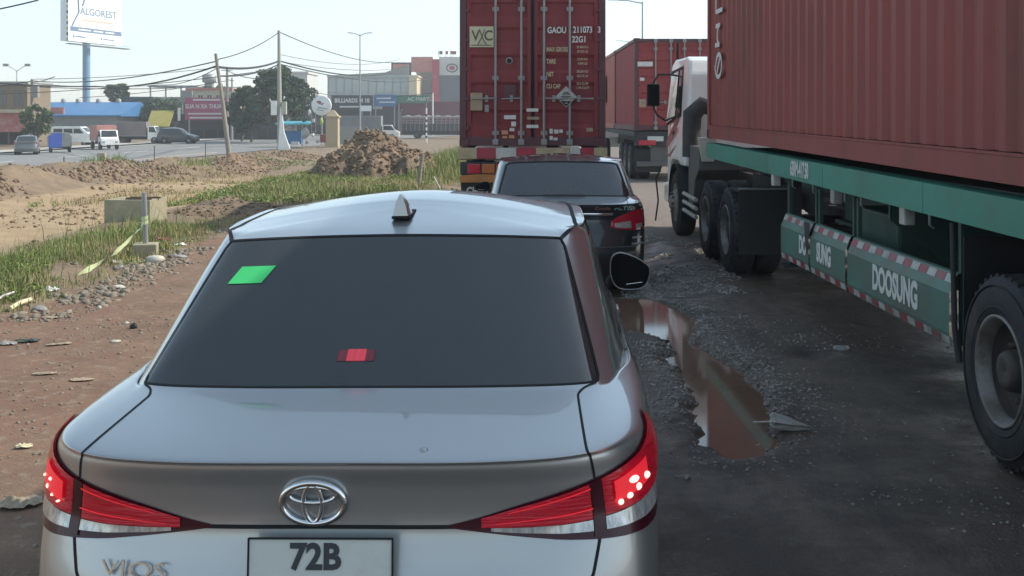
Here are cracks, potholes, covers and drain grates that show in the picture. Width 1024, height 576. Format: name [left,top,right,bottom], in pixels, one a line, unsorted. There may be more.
pothole [626,298,809,466]
